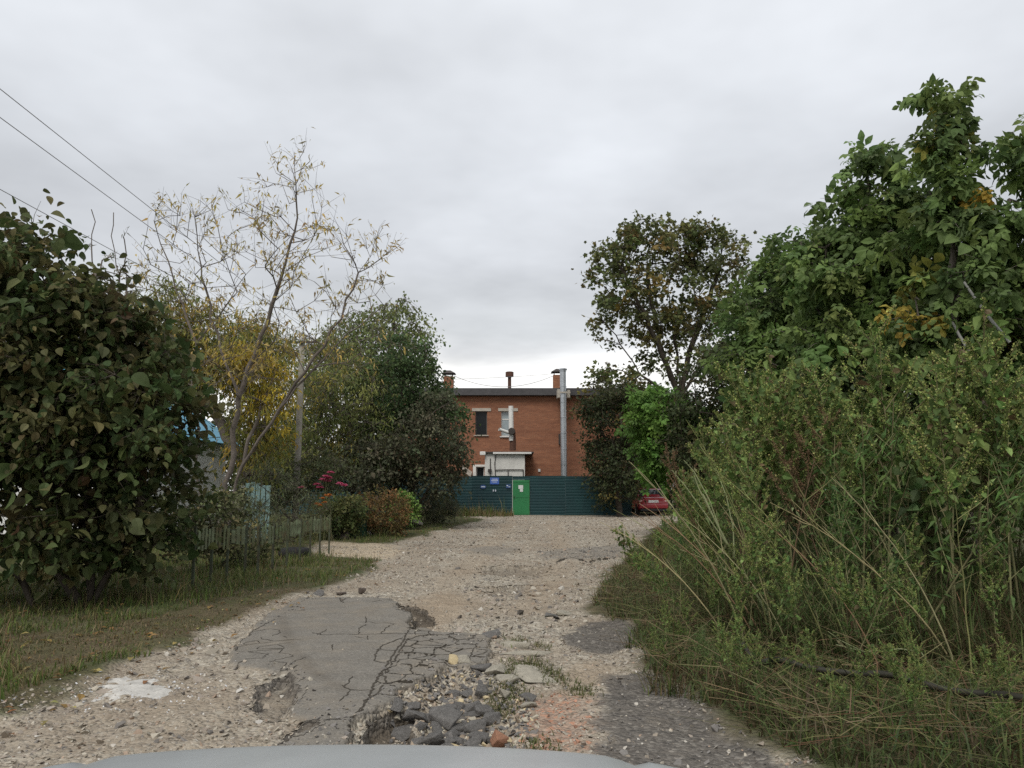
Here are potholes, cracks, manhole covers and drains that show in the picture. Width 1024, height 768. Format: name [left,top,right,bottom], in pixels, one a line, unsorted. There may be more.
crack [234,600,496,734]
pothole [393,602,438,629]
pothole [244,669,308,722]
pothole [346,700,421,745]
